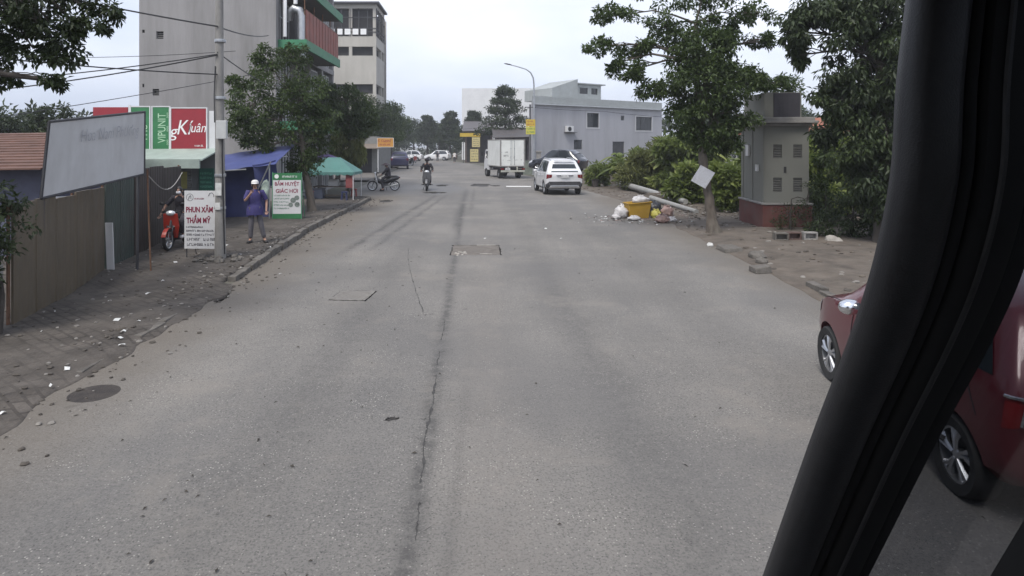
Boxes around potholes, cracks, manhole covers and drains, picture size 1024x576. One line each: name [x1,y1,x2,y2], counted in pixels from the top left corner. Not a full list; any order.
crack [415,321,445,541]
manhole cover [66,385,121,403]
manhole cover [450,245,502,256]
manhole cover [329,290,377,301]
